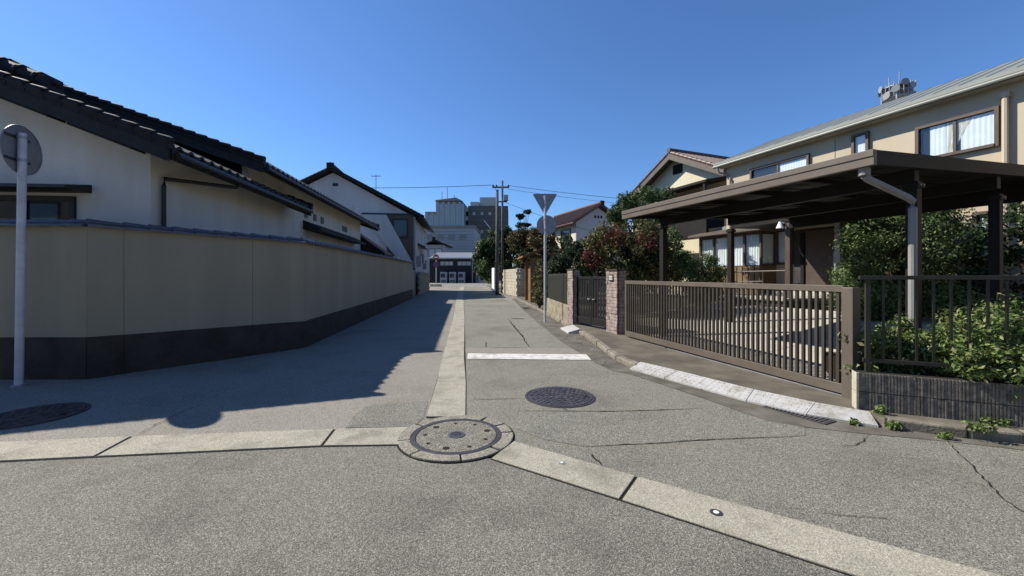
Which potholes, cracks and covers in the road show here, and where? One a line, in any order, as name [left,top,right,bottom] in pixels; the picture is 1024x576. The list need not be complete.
crack [485,318,529,348]
manhole cover [525,386,595,408]
drain grate [763,406,836,425]
manhole cover [0,402,91,430]
crack [589,436,791,465]
manhole cover [397,415,514,464]
crack [947,440,1024,512]
